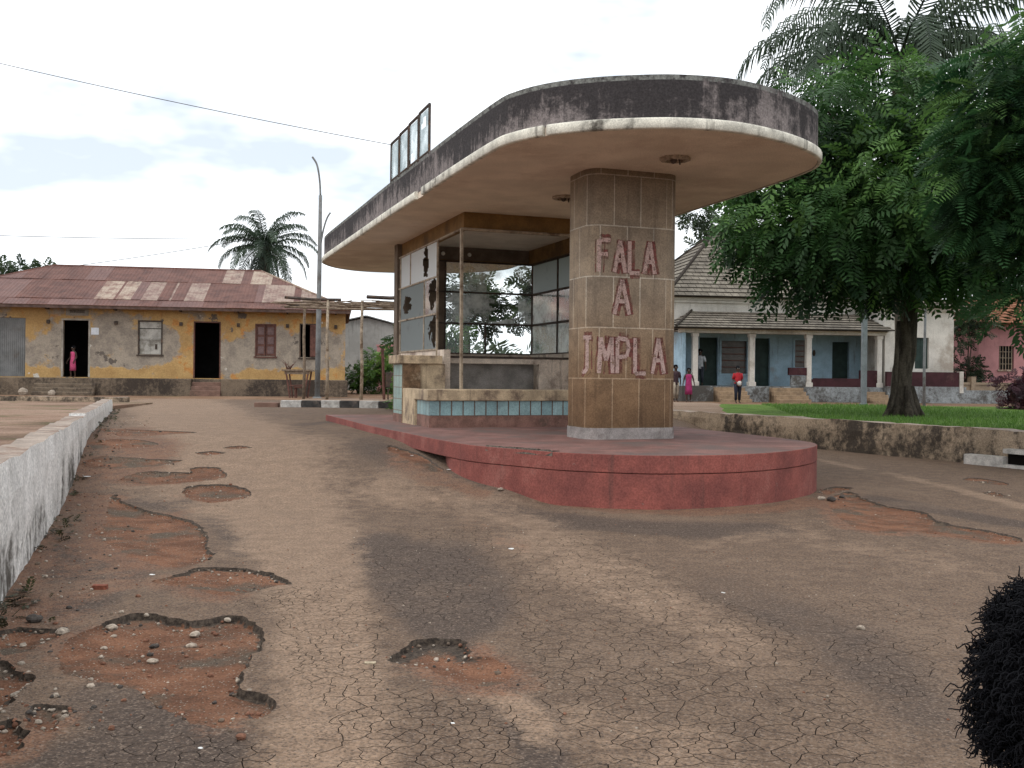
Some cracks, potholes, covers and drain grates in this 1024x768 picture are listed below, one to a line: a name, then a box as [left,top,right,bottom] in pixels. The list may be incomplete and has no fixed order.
crack [237,574,537,768]
pothole [92,494,215,568]
pothole [387,637,514,686]
pothole [0,627,60,655]
pothole [820,486,852,495]
pothole [55,613,276,728]
crack [500,535,884,768]
pothole [25,704,74,733]
pothole [118,467,227,484]
crack [104,714,276,768]
pothole [182,484,251,503]
